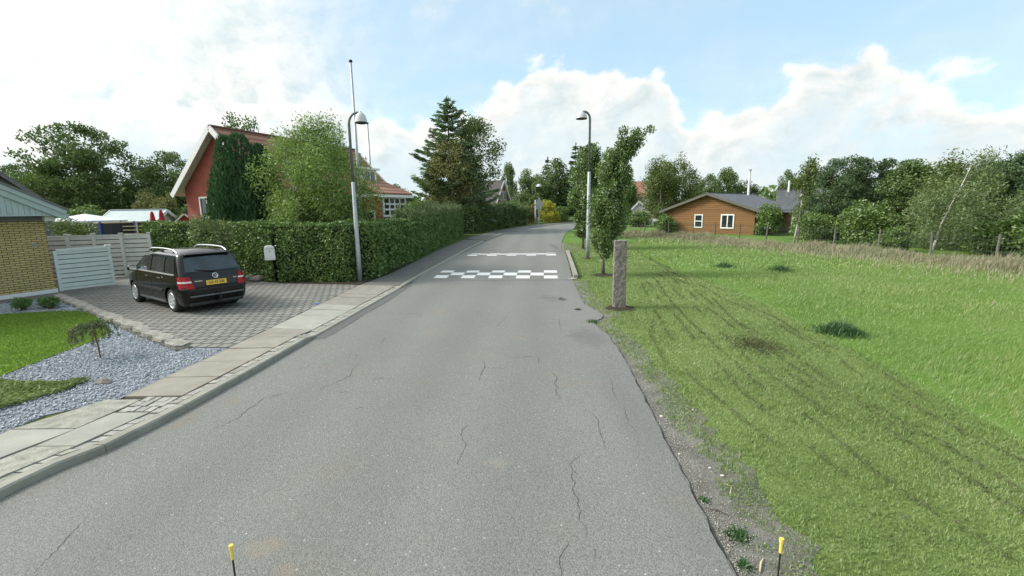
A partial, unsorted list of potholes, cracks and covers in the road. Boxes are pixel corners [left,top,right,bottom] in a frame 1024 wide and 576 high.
crack [559,455,586,576]
